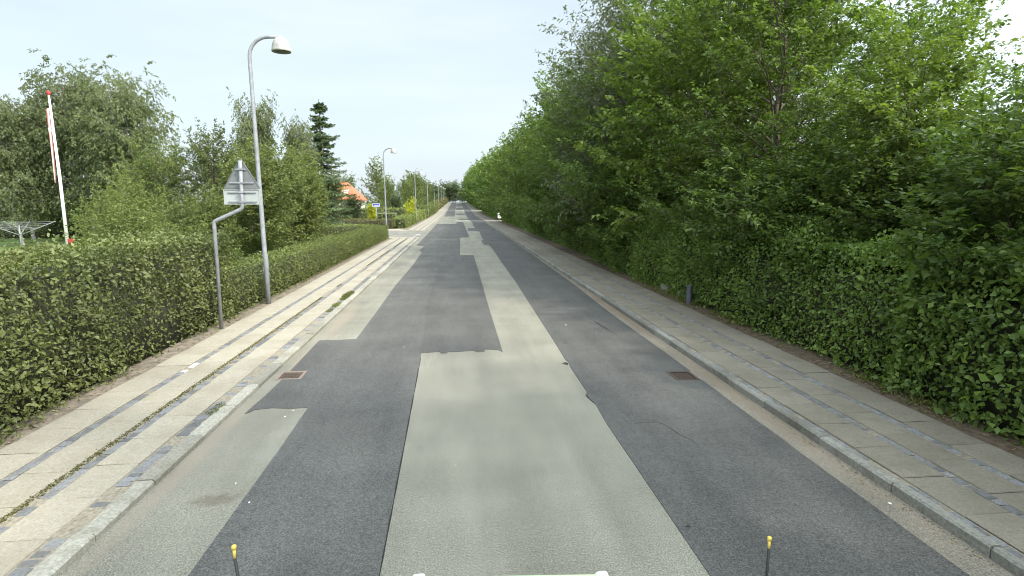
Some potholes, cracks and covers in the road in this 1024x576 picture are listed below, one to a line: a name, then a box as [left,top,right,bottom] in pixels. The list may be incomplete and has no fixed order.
drain grate [274,371,308,380]
drain grate [667,371,701,380]
